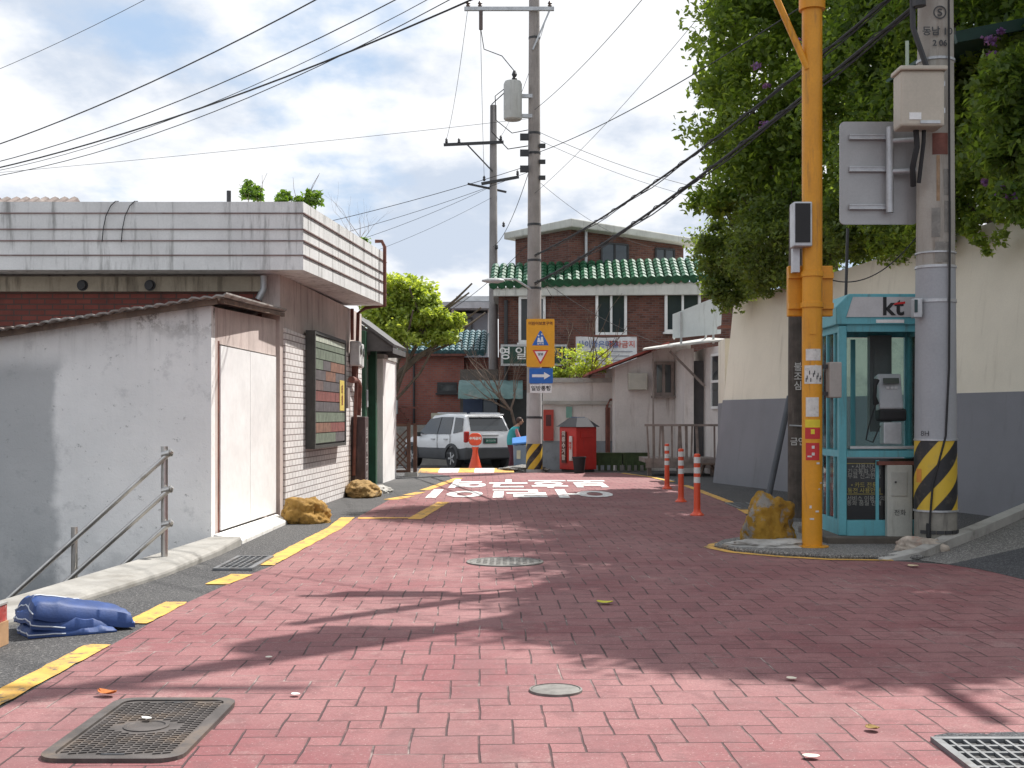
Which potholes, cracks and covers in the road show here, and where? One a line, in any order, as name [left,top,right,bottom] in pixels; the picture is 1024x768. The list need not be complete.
manhole cover [41,697,235,763]
drain grate [930,736,1024,768]
manhole cover [529,683,582,697]
drain grate [212,555,274,571]
manhole cover [466,557,544,567]
